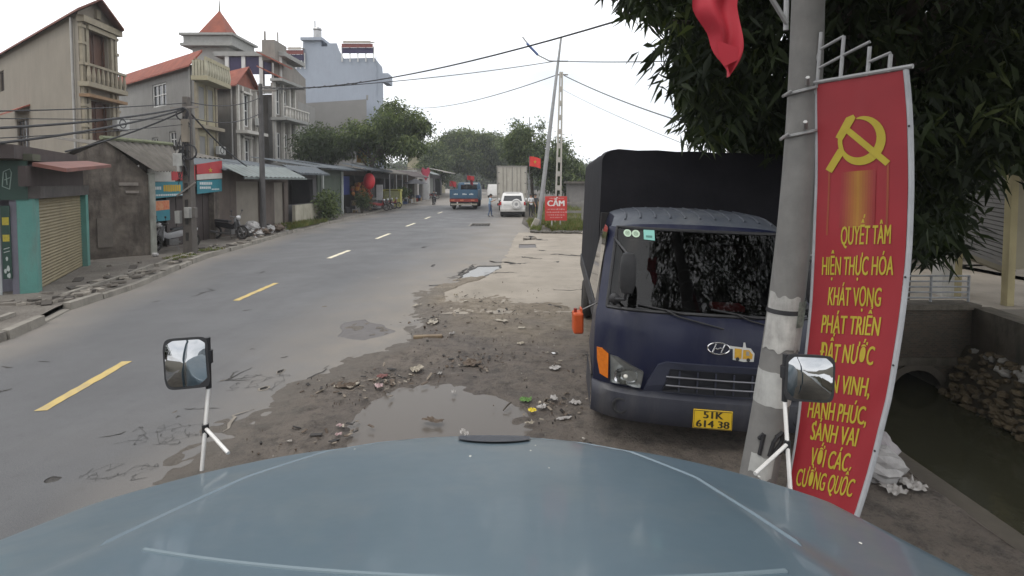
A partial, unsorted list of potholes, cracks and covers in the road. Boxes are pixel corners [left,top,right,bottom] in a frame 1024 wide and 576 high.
crack [220,356,287,391]
crack [80,463,159,480]
crack [103,407,205,445]
pothole [456,265,502,281]
